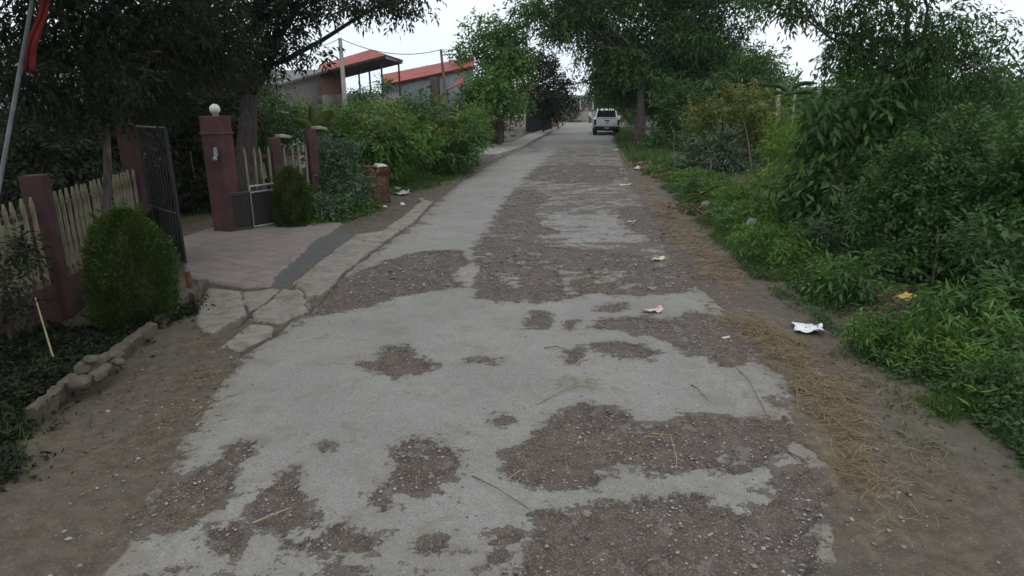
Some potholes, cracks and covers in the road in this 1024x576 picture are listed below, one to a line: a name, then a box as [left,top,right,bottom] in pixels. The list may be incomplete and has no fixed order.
pothole [363,435,468,514]
pothole [313,439,341,455]
pothole [301,250,470,318]
pothole [484,189,566,238]
pothole [512,466,844,576]
pothole [487,412,523,427]
pothole [498,400,798,492]
pothole [243,464,390,560]
pothole [584,310,767,369]
pothole [352,345,441,378]
